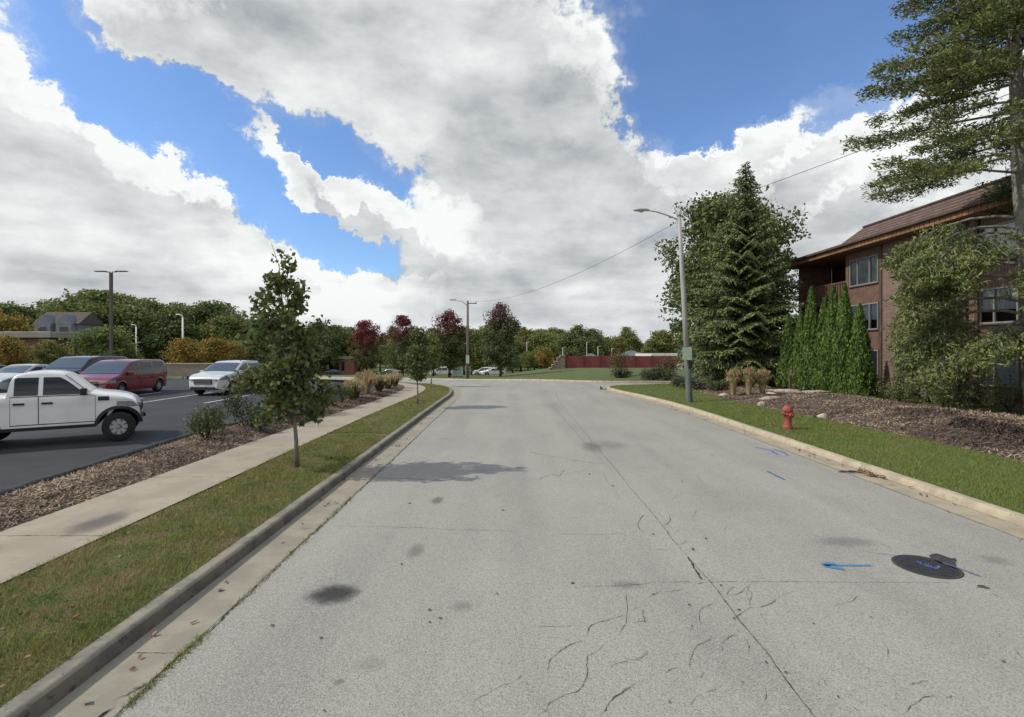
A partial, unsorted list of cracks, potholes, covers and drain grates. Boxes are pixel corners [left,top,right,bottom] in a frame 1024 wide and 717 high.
manhole cover [891,555,964,579]
crack [665,582,785,704]
crack [535,510,712,713]
